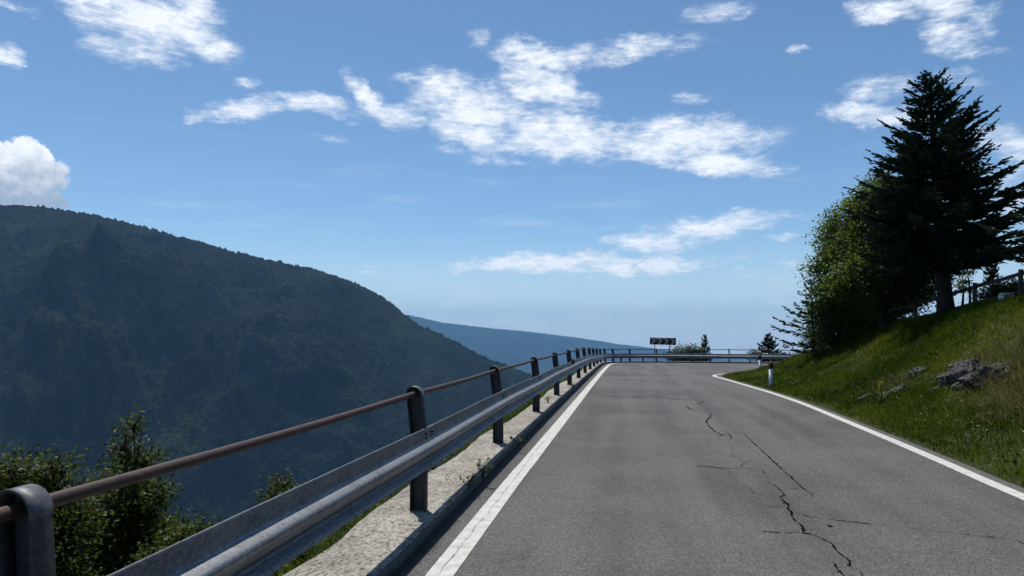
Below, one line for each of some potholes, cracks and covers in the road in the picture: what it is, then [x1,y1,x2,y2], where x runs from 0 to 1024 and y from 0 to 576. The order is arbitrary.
crack [686,401,1024,576]
